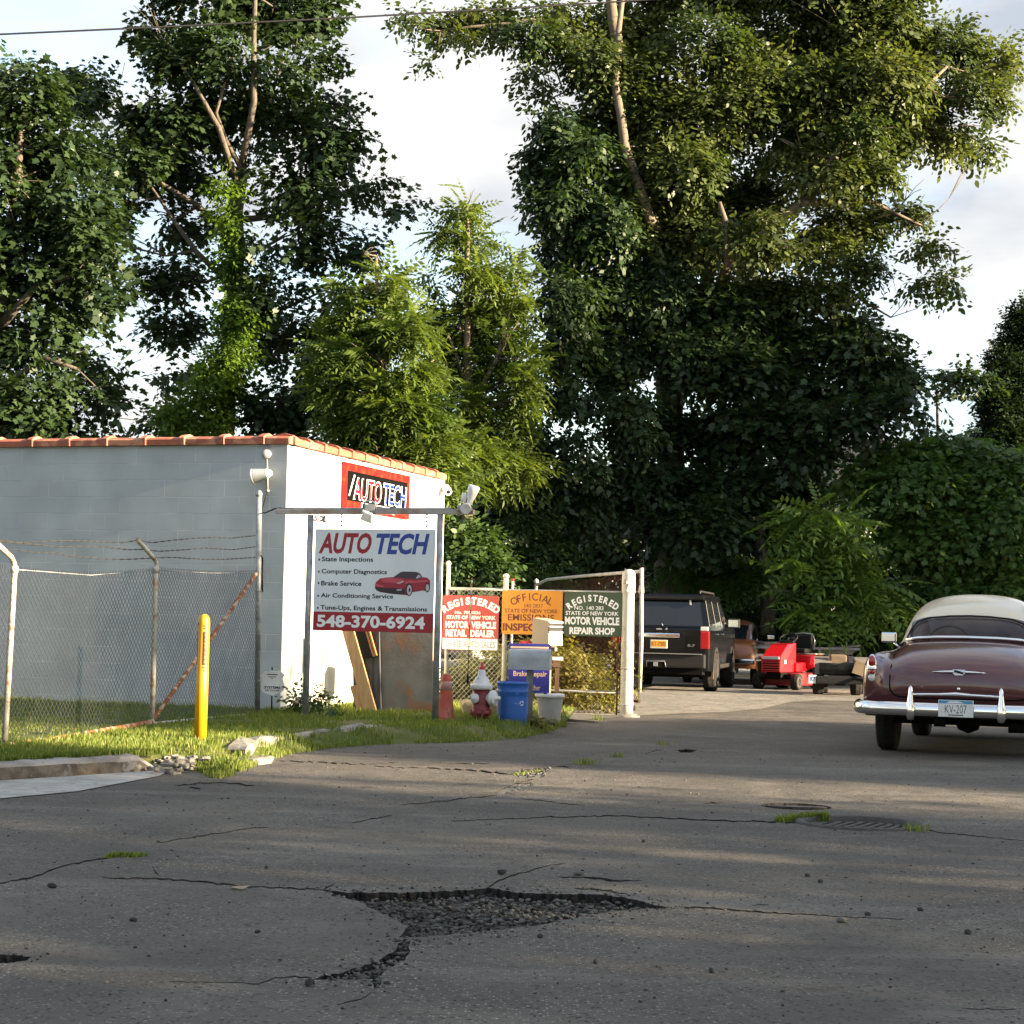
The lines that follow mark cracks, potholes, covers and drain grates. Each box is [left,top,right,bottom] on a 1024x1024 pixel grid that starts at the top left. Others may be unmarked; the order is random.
pothole [324,888,672,937]
crack [927,830,1024,841]
pothole [0,954,31,963]
crack [0,857,335,891]
crack [353,795,495,823]
crack [169,976,310,985]
crack [682,904,904,920]
drain grate [795,815,927,831]
crack [154,827,268,844]
